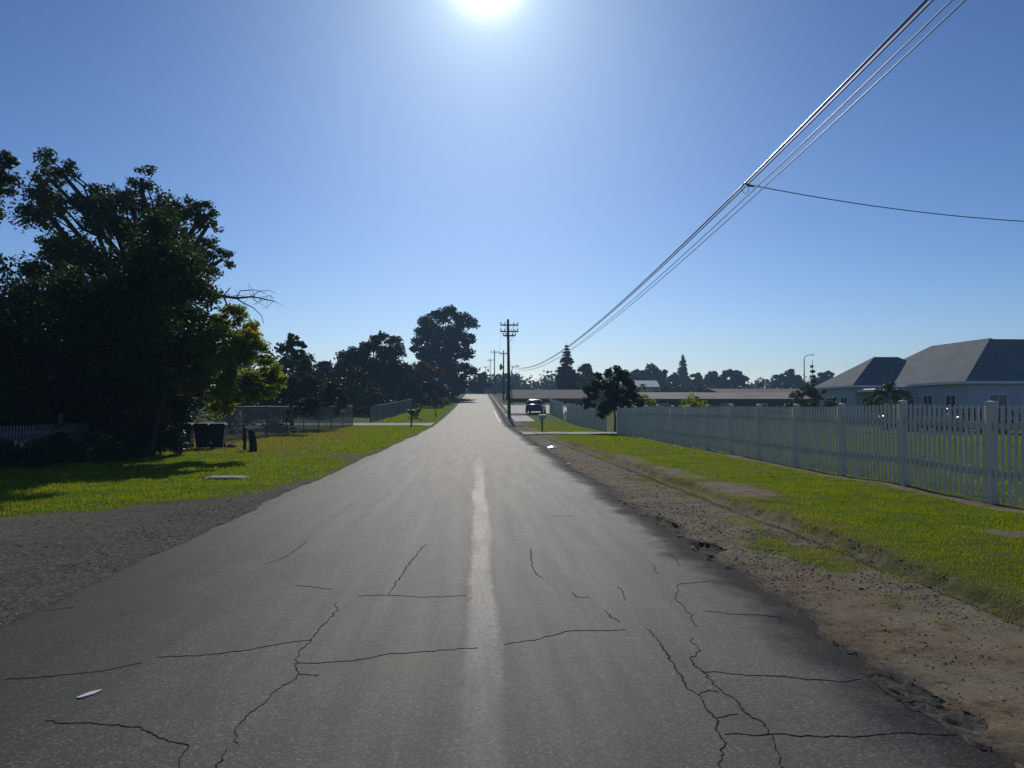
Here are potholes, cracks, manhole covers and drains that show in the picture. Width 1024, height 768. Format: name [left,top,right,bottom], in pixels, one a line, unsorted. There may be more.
crack [5,554,958,768]
pothole [688,542,727,553]
